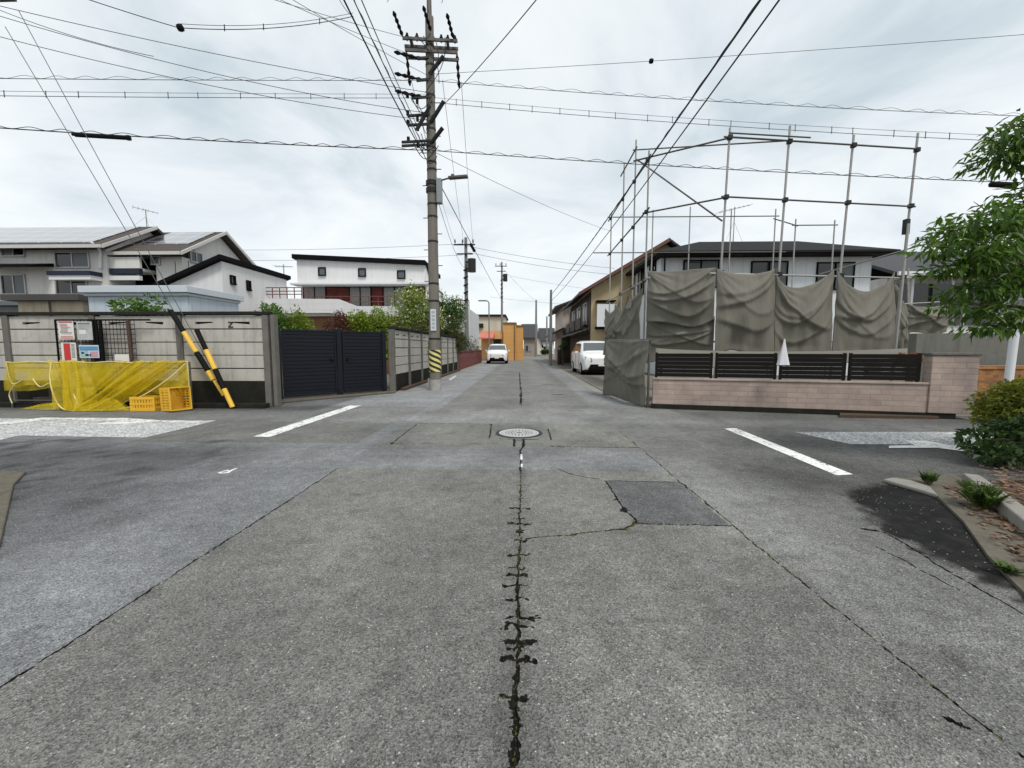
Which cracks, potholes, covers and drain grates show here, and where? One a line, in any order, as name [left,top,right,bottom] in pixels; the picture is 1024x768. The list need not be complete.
manhole cover [496,428,542,438]
crack [499,429,727,768]
crack [860,528,1023,614]
